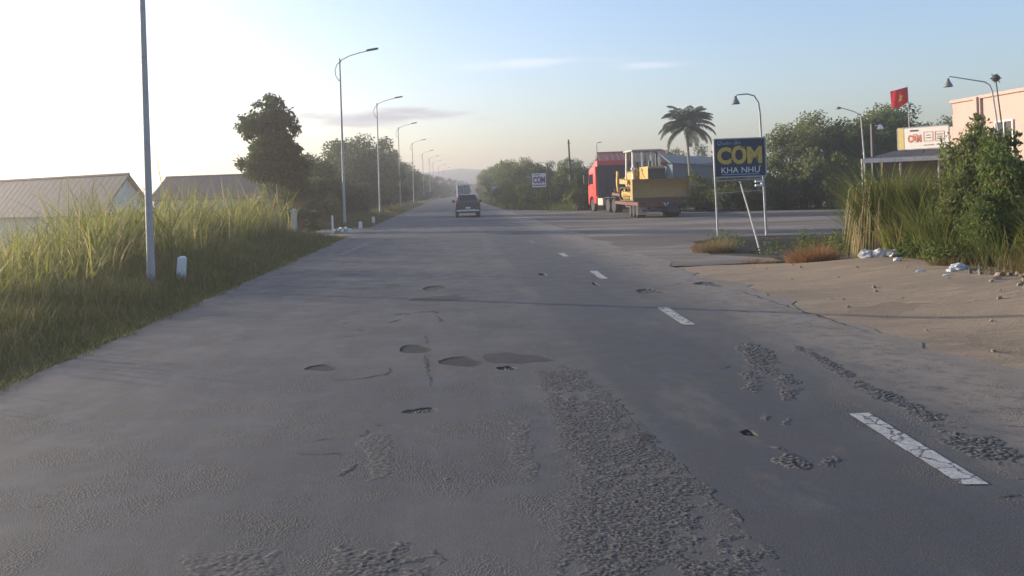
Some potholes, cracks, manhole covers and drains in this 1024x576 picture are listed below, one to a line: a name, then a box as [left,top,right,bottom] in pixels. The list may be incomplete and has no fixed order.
pothole [818,456,847,468]
pothole [768,446,814,471]
crack [389,311,443,386]
pothole [438,356,483,367]
pothole [400,345,432,353]
